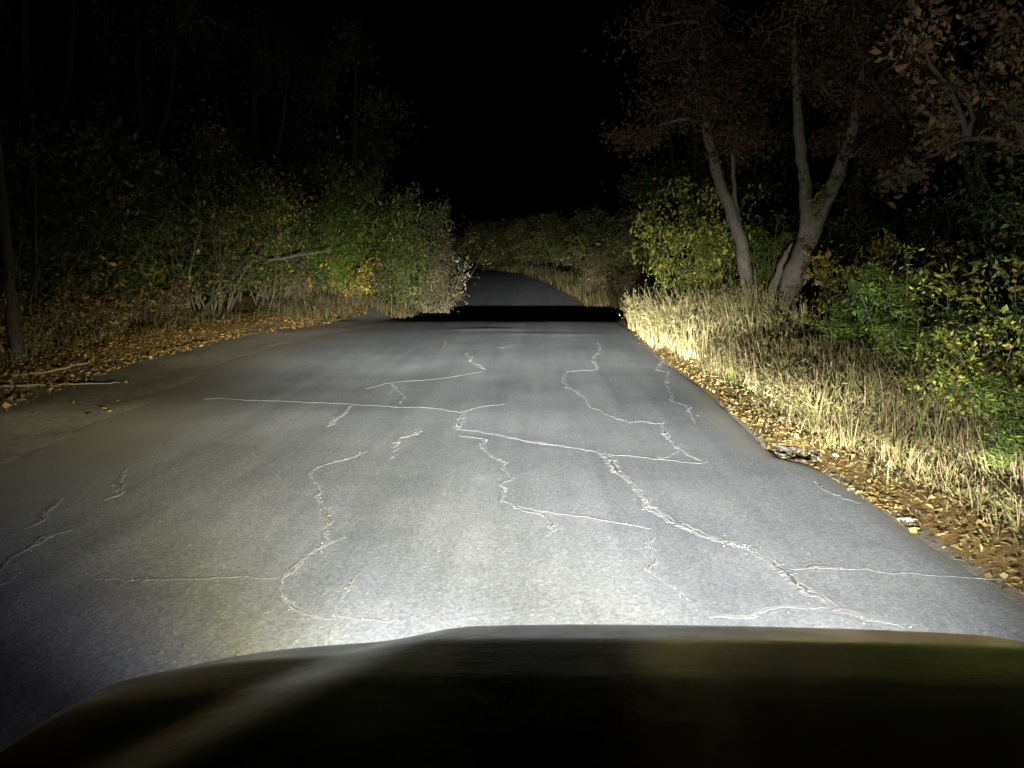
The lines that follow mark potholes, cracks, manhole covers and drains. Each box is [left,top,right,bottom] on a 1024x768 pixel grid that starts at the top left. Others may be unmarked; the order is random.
crack [0,498,72,586]
crack [100,451,400,646]
crack [213,342,996,629]
